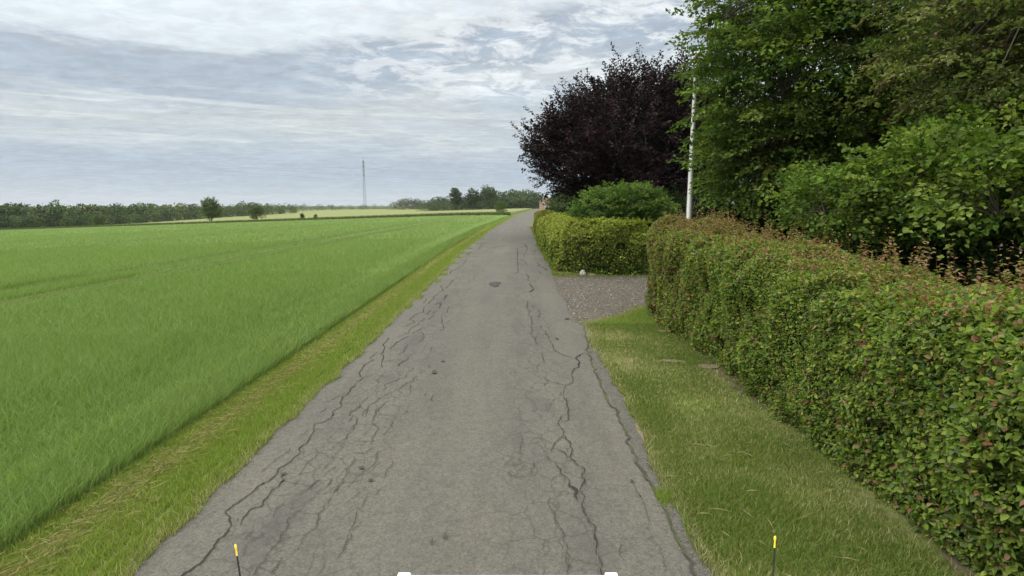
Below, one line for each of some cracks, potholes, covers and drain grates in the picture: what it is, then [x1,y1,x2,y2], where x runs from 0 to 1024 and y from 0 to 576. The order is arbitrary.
crack [508,245,697,576]
crack [181,242,497,576]
